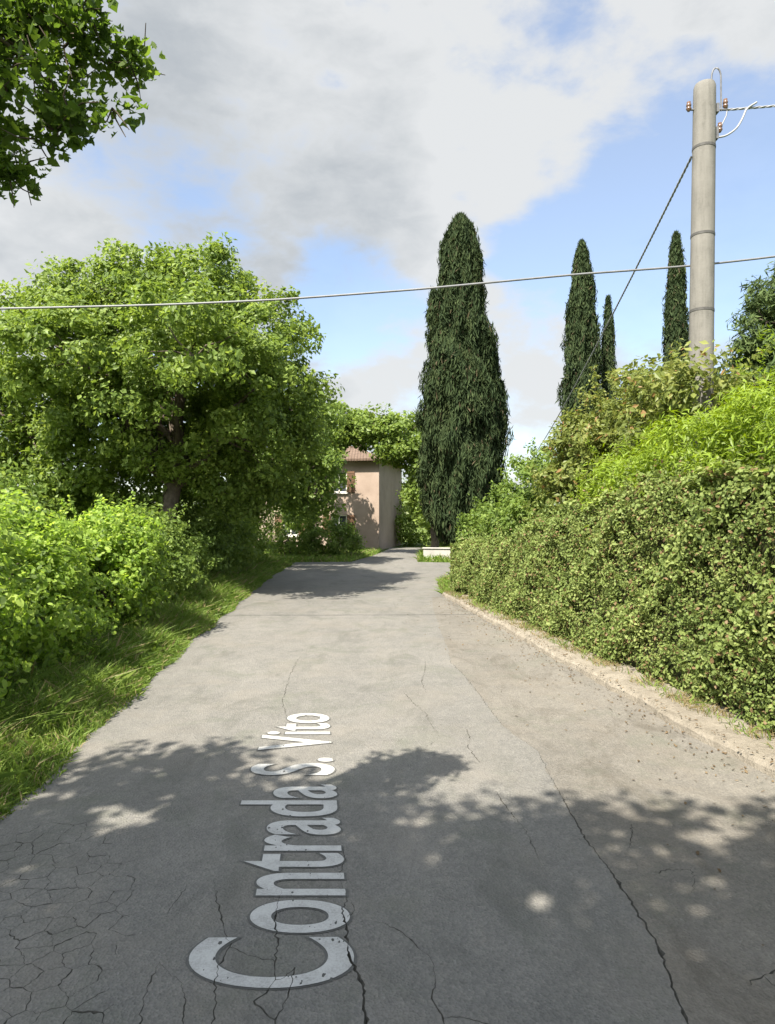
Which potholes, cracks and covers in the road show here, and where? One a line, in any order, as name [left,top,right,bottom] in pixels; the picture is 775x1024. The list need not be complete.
crack [747,970,775,986]
crack [339,851,488,1024]
crack [0,822,138,1024]
crack [448,652,695,1024]
crack [139,962,187,1024]
crack [211,880,295,1024]
